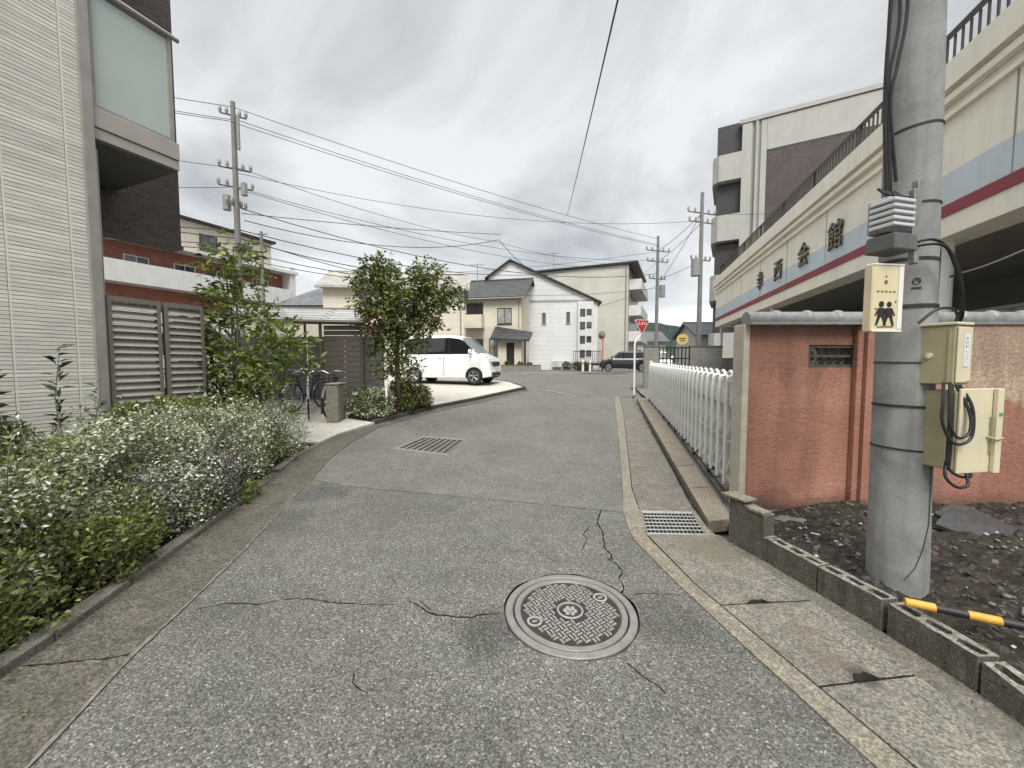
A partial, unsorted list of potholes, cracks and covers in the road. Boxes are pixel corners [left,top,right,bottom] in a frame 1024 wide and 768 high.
crack [194,598,496,618]
crack [582,513,683,596]
drain grate [394,436,467,455]
crack [619,657,668,697]
drain grate [641,511,707,535]
manhole cover [505,575,638,662]
